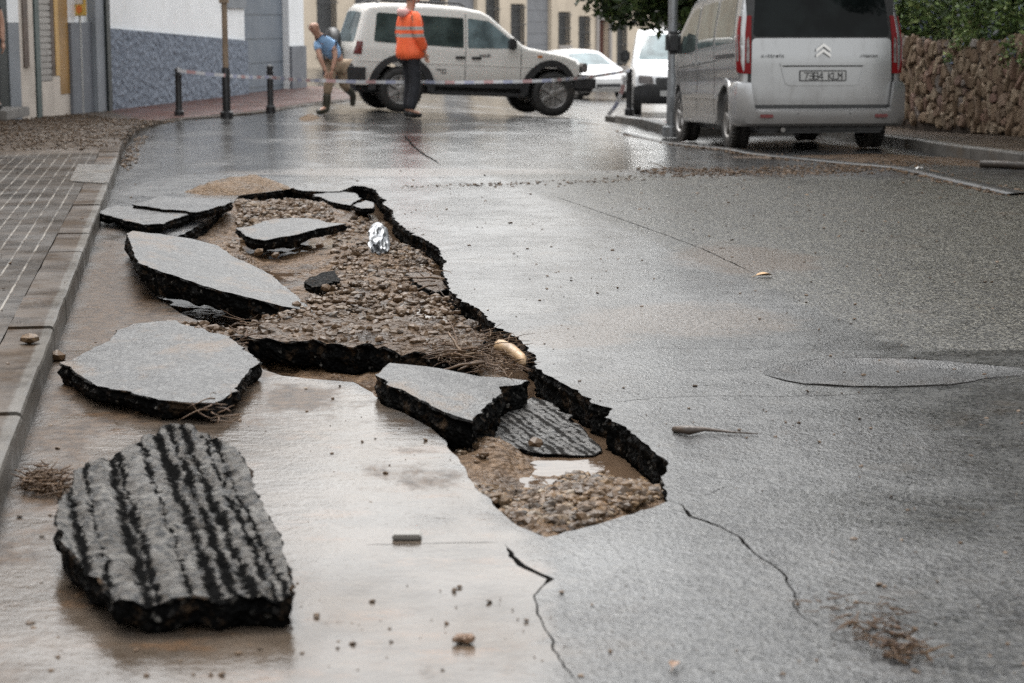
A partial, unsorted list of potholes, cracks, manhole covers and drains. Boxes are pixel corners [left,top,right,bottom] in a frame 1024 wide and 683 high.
pothole [155,186,669,536]
crack [674,486,830,630]
crack [404,136,440,164]
crack [366,542,577,683]
